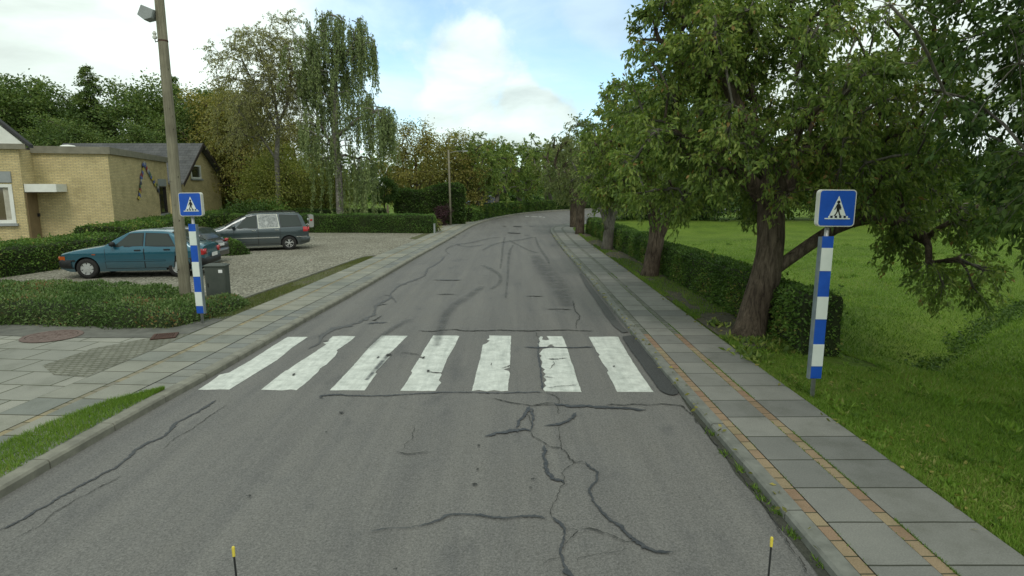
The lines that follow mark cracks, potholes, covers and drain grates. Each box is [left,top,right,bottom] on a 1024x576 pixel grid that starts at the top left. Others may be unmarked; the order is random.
crack [319,302,589,531]
manhole cover [19,330,84,343]
crack [544,527,629,563]
